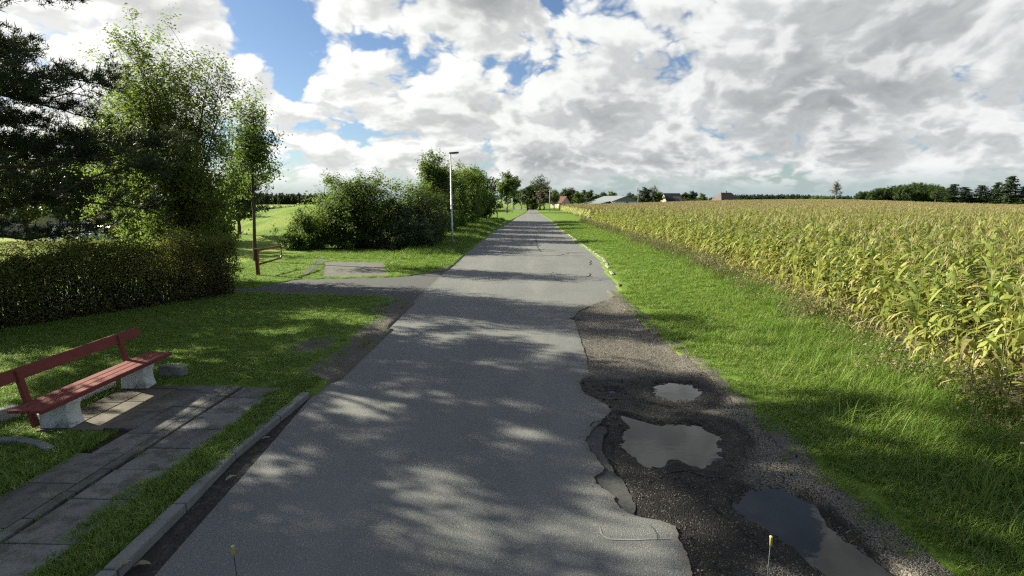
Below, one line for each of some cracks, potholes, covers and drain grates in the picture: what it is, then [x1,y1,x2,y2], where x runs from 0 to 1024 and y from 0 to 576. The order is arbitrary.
pothole [707,472,929,576]
pothole [637,376,720,407]
pothole [602,405,746,479]
